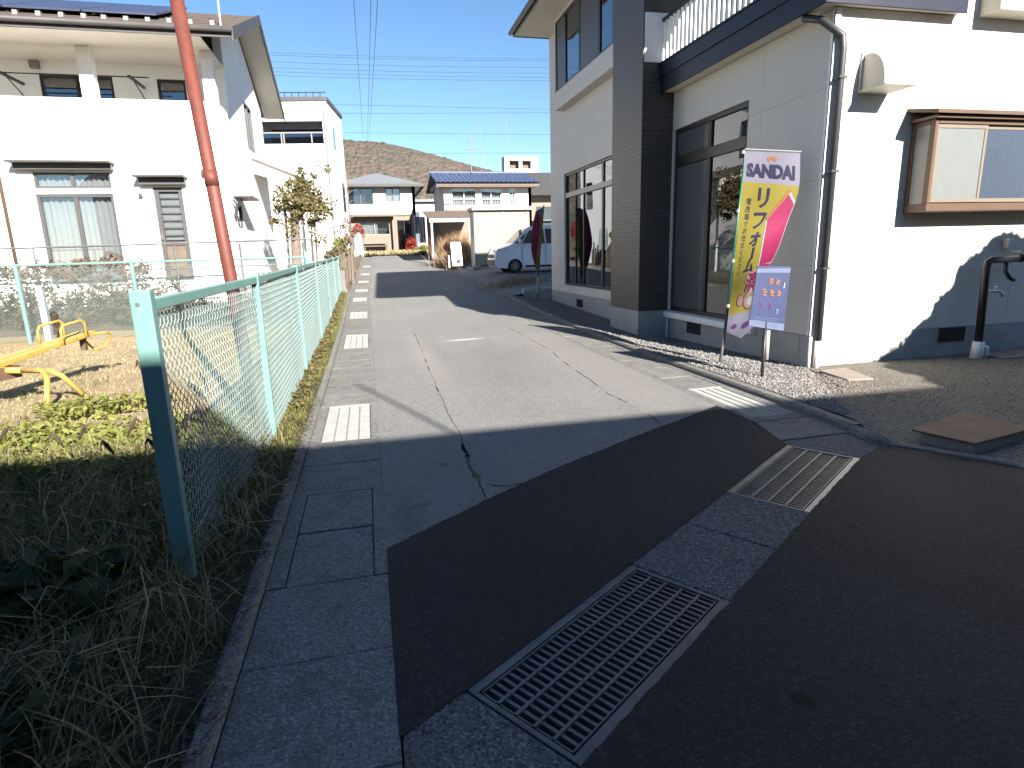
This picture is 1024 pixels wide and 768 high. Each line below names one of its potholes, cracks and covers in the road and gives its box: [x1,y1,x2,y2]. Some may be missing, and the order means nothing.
drain grate [726,445,860,513]
crack [512,329,662,425]
drain grate [466,565,730,768]
crack [383,318,521,498]
